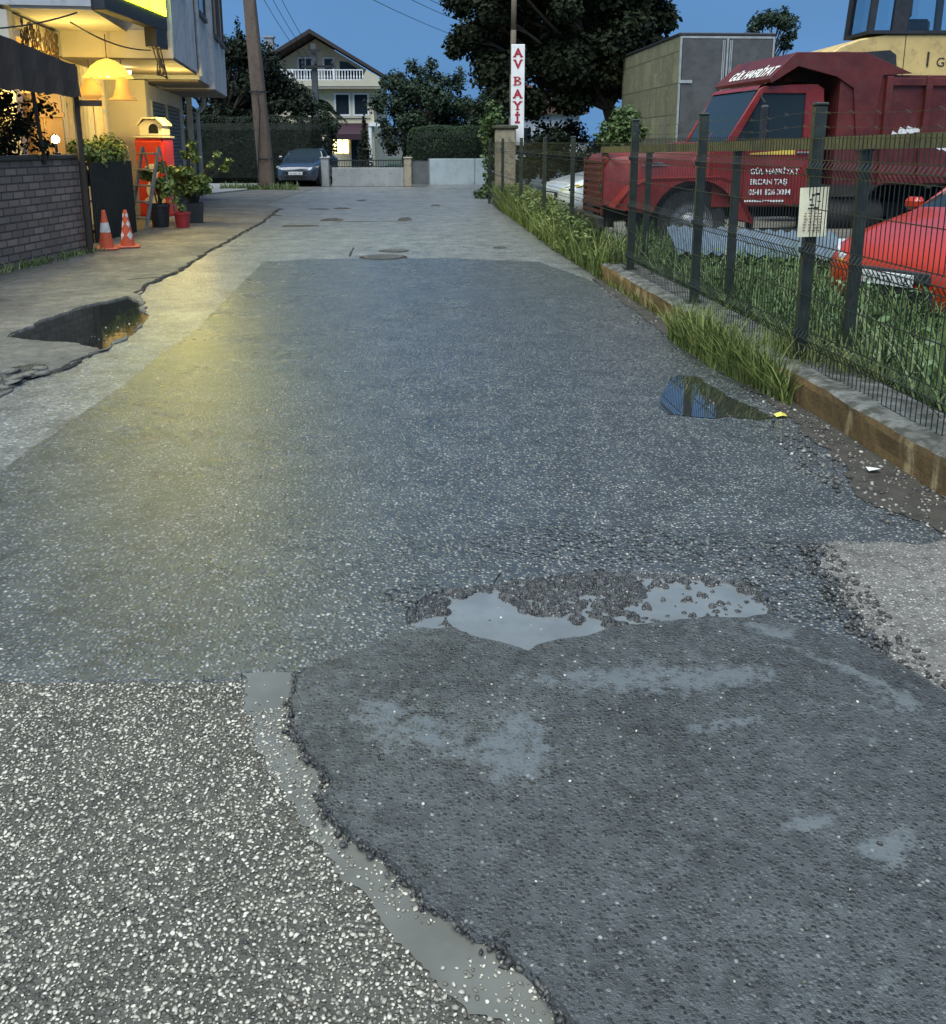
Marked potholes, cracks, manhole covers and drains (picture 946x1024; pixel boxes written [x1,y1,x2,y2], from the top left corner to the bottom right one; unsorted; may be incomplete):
pothole [10,297,149,350]
pothole [406,571,773,650]
crack [127,209,280,293]
crack [42,348,110,376]
